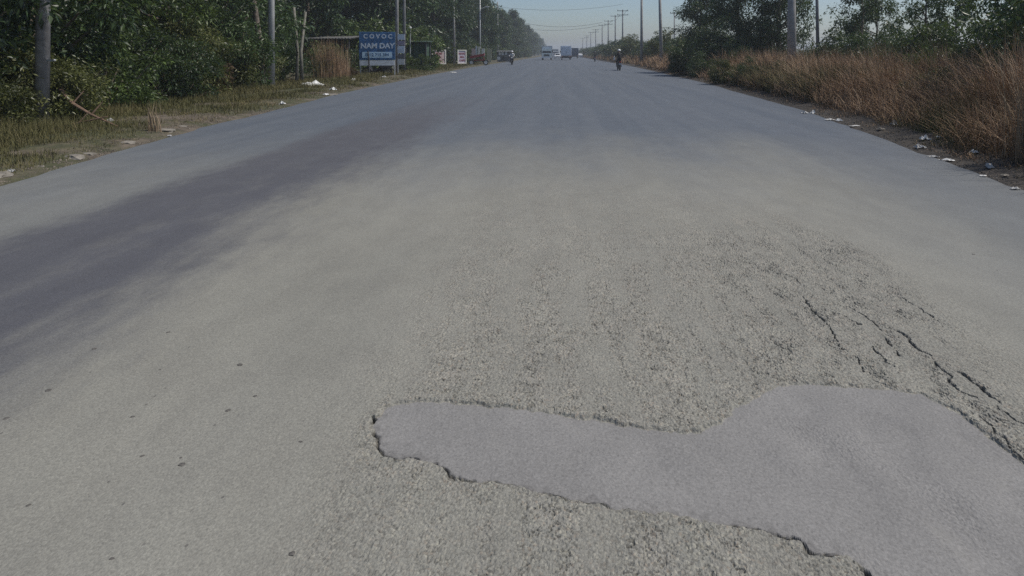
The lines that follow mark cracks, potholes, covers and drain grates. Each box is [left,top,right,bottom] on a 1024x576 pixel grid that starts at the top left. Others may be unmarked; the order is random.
crack [280,174,1024,576]
